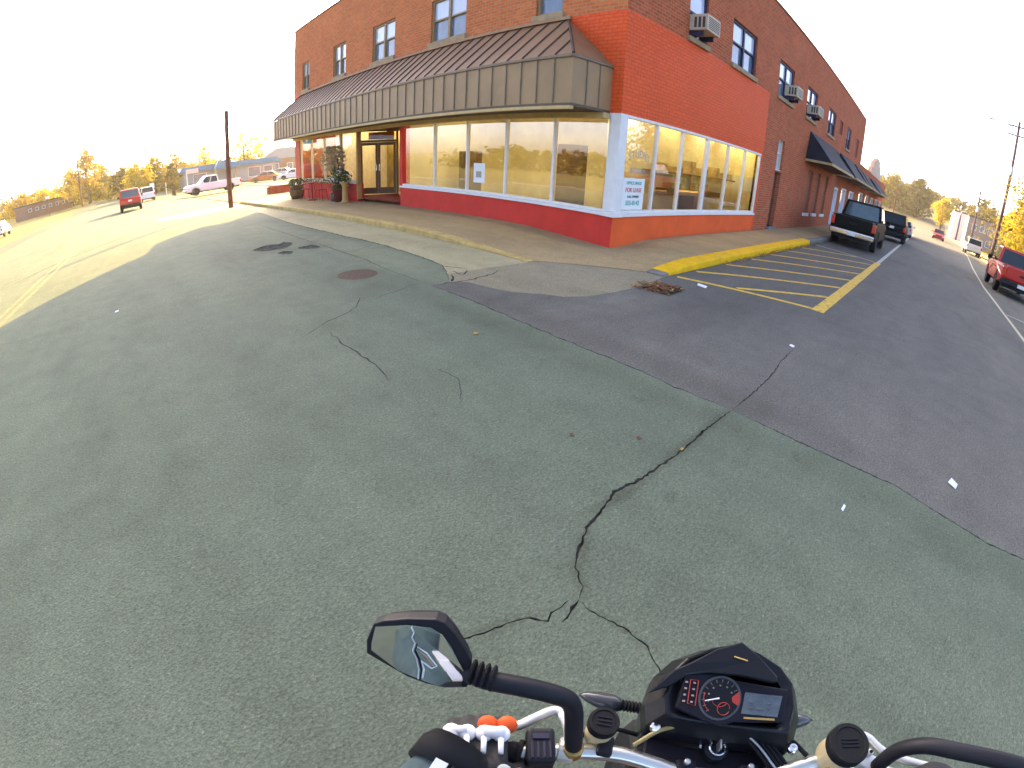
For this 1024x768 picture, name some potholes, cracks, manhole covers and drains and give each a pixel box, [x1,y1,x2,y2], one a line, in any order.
crack [308,299,390,382]
crack [279,219,499,285]
manhole cover [337,269,378,280]
pothole [254,242,292,251]
crack [464,352,790,672]
